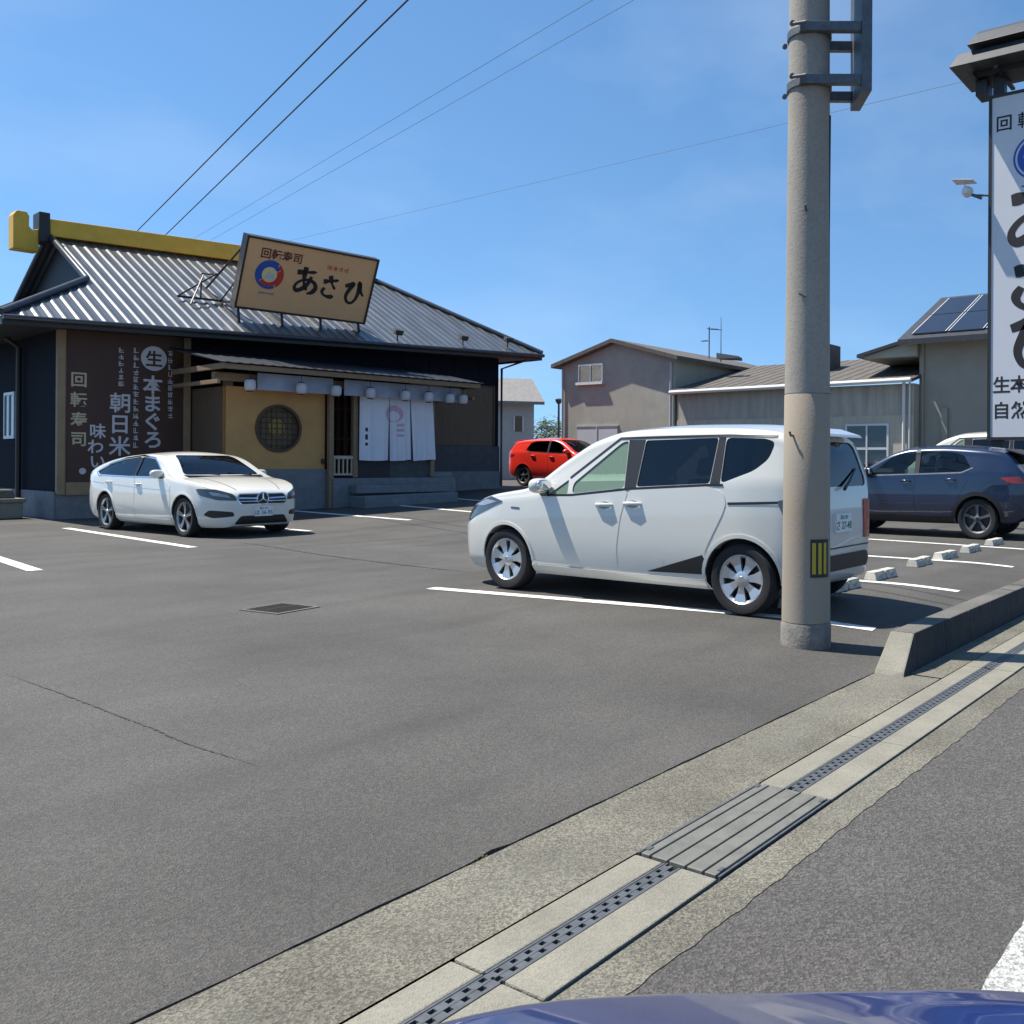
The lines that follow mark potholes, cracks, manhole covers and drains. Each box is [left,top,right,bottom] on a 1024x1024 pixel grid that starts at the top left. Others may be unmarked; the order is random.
drain grate [239,603,320,615]
crack [19,678,253,764]
